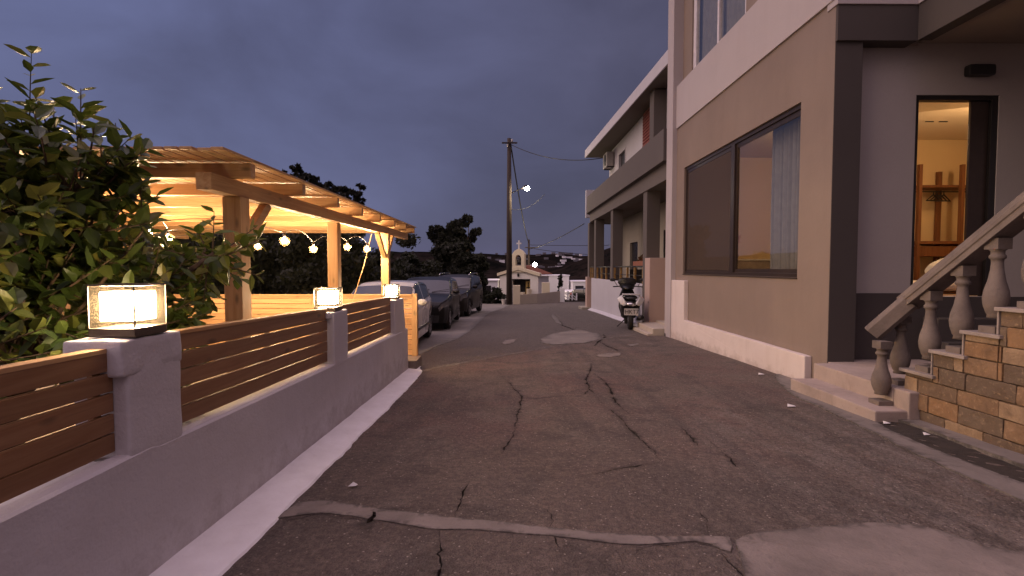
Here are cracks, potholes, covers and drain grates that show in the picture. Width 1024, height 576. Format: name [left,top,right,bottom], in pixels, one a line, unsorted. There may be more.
crack [503,368,657,472]
crack [437,485,468,576]
